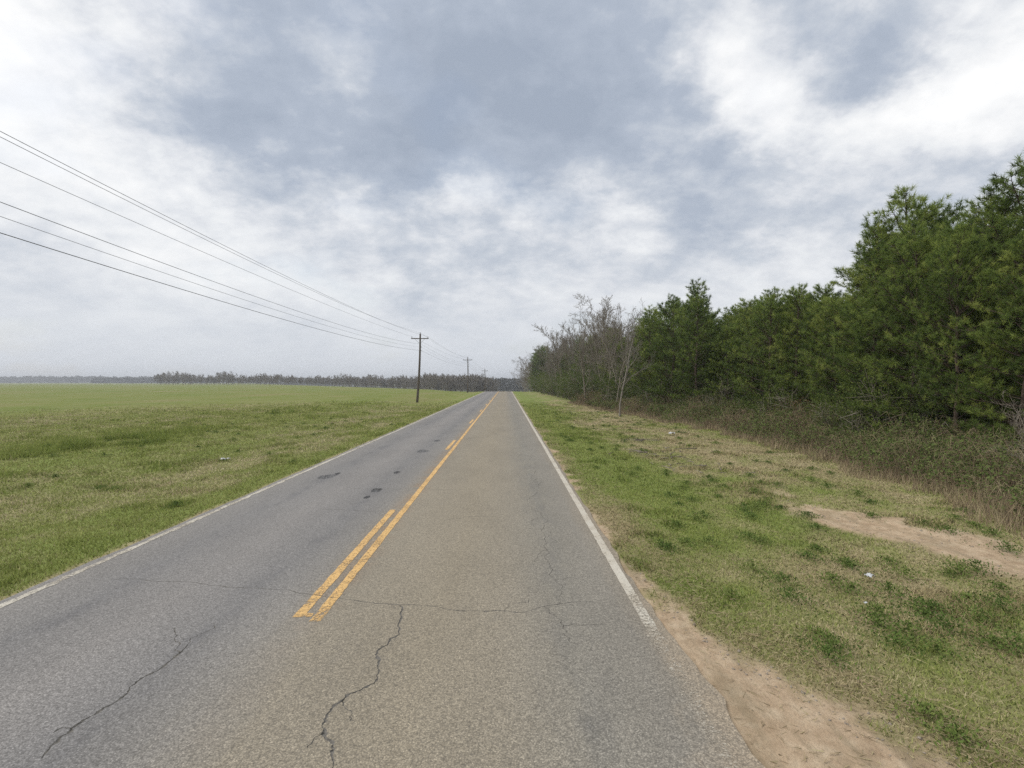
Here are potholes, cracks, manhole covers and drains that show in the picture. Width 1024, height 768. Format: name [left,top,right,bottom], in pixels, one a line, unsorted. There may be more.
crack [90,456,610,768]
crack [42,626,215,758]
